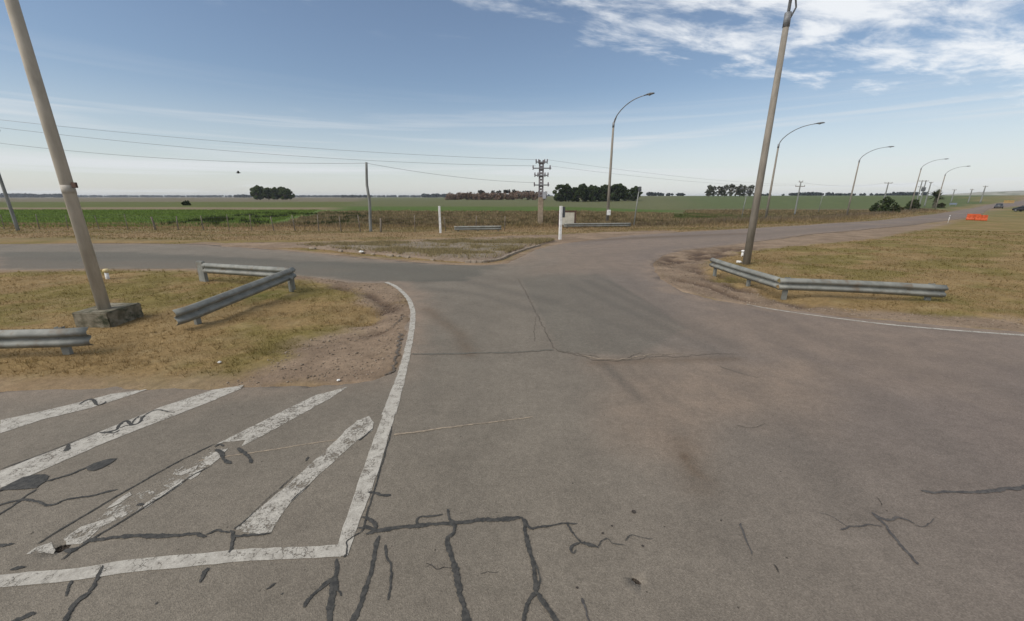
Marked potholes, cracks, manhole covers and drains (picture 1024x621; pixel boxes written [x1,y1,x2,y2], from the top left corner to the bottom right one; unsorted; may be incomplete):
crack [819,498,935,564]
